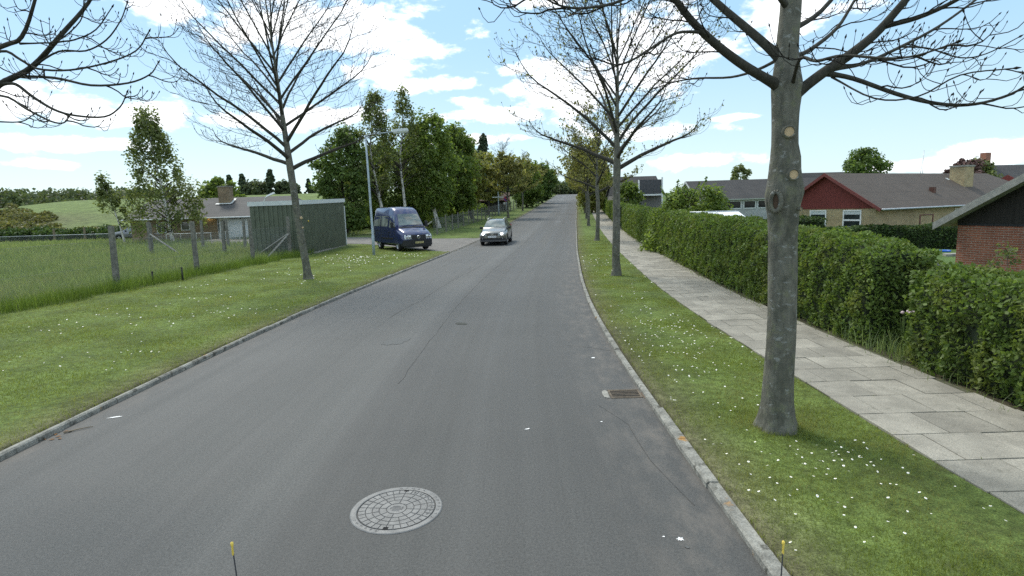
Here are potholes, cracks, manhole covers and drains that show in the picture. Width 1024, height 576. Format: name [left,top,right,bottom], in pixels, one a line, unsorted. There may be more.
crack [600,406,694,505]
drain grate [602,389,645,399]
manhole cover [350,487,443,535]
